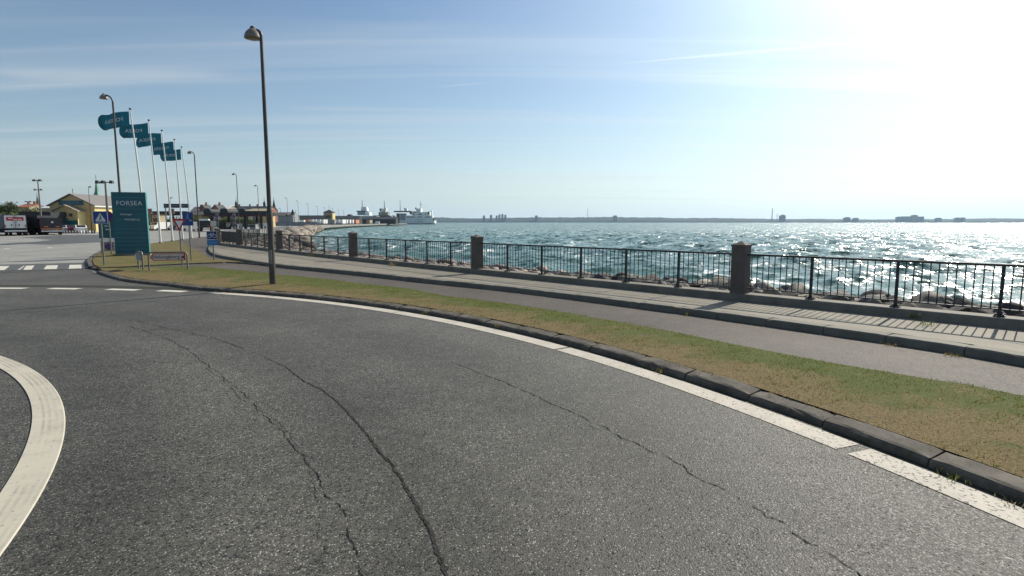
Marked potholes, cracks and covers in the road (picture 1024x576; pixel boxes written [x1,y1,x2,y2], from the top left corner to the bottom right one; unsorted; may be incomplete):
crack [458,364,862,576]
crack [129,325,363,576]
